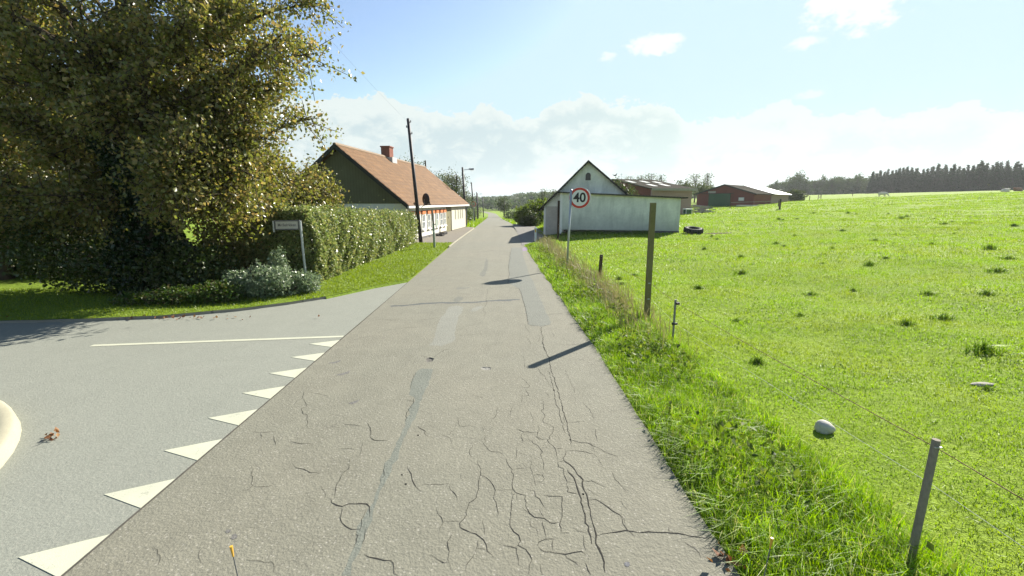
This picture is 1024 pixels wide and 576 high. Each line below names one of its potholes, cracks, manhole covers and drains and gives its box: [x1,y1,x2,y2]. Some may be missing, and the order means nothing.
crack [296,424,397,575]
crack [408,251,711,575]
